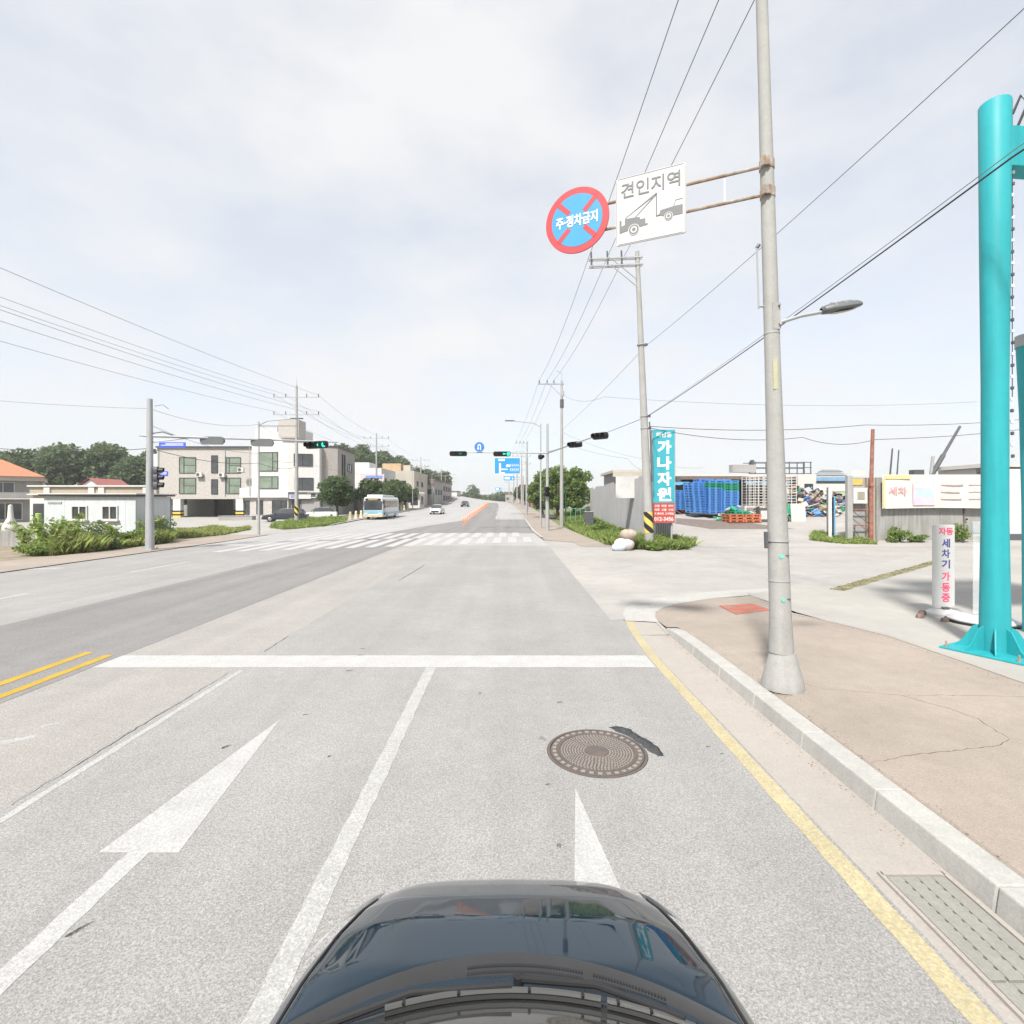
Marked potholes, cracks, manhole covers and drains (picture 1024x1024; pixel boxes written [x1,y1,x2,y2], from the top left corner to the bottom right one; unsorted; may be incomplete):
manhole cover [547,729,648,778]
crack [811,685,1024,763]
